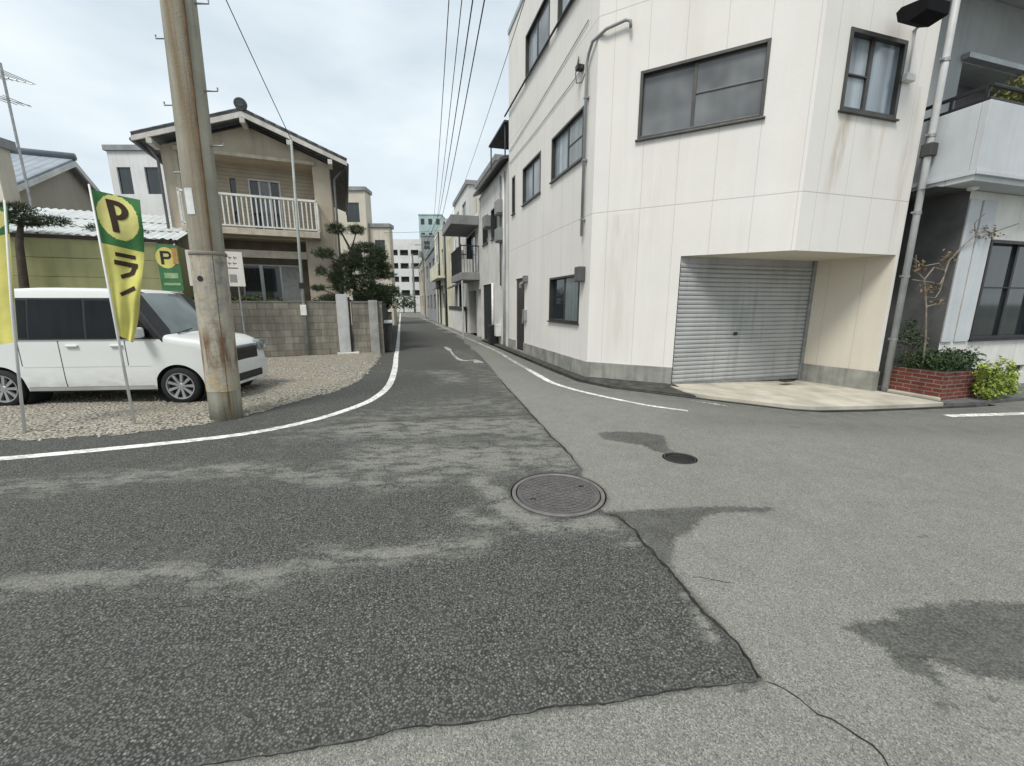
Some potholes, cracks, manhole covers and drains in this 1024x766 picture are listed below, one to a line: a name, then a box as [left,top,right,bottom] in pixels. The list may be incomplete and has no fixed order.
manhole cover [511,473,606,517]
manhole cover [663,452,696,464]
